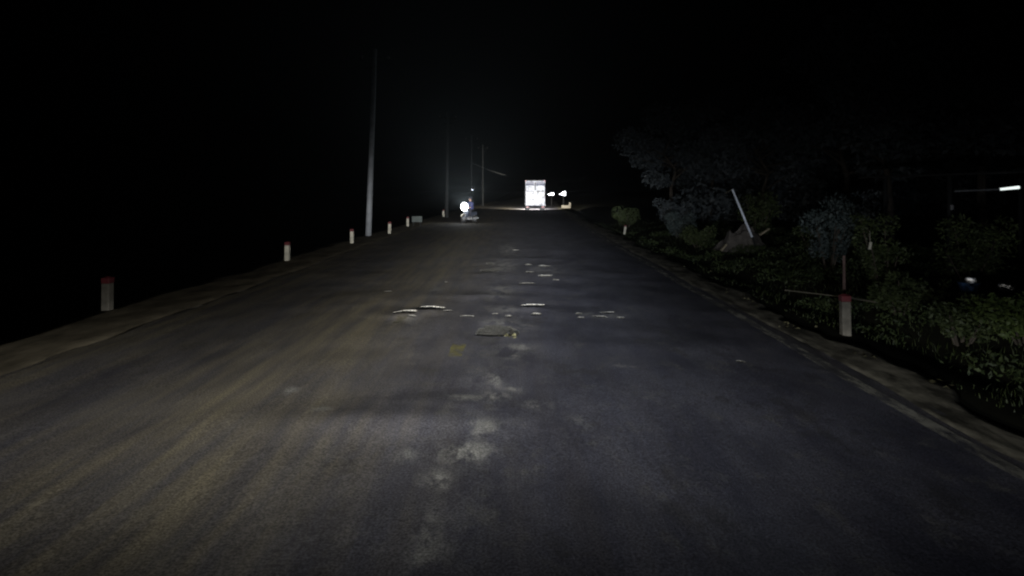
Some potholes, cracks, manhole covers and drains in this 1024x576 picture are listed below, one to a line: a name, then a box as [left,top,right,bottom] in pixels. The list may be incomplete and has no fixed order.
pothole [474,325,520,337]
